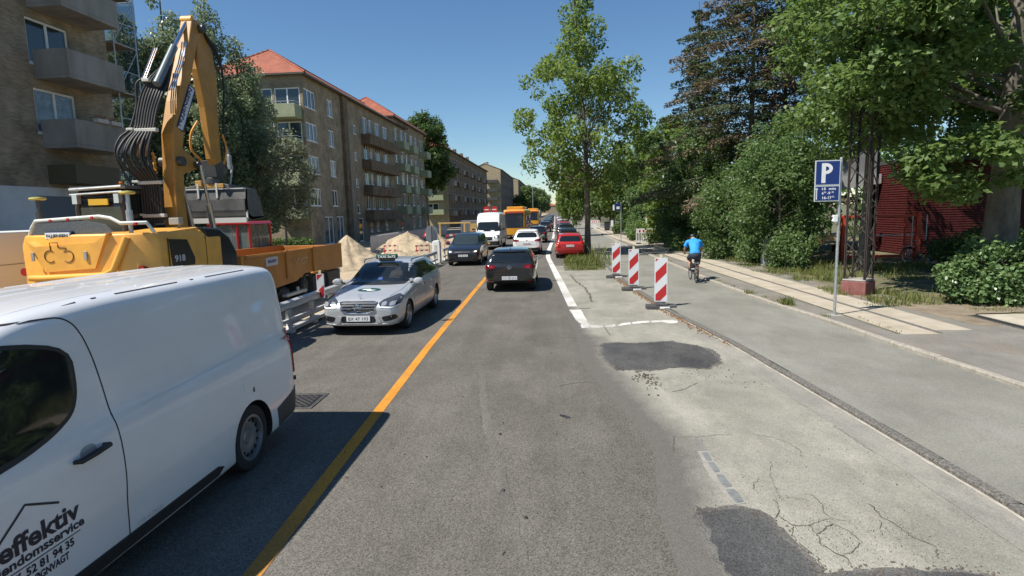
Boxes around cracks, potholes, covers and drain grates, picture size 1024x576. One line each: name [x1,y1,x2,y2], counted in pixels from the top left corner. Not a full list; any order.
crack [752,460,939,570]
